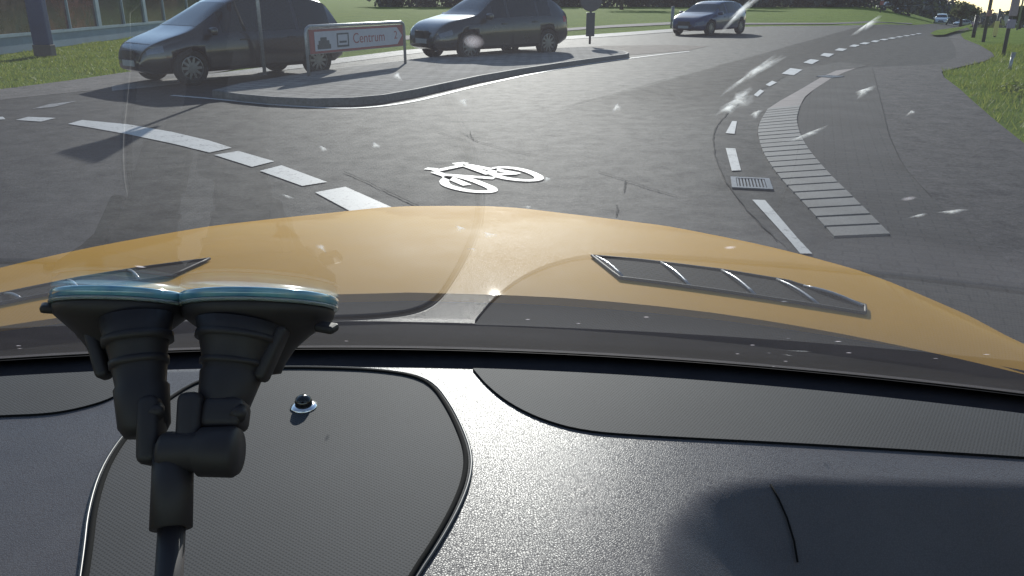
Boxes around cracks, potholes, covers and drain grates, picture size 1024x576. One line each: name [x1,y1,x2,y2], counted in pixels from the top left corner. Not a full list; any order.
drain grate [730,176,773,190]
crack [344,171,419,206]
